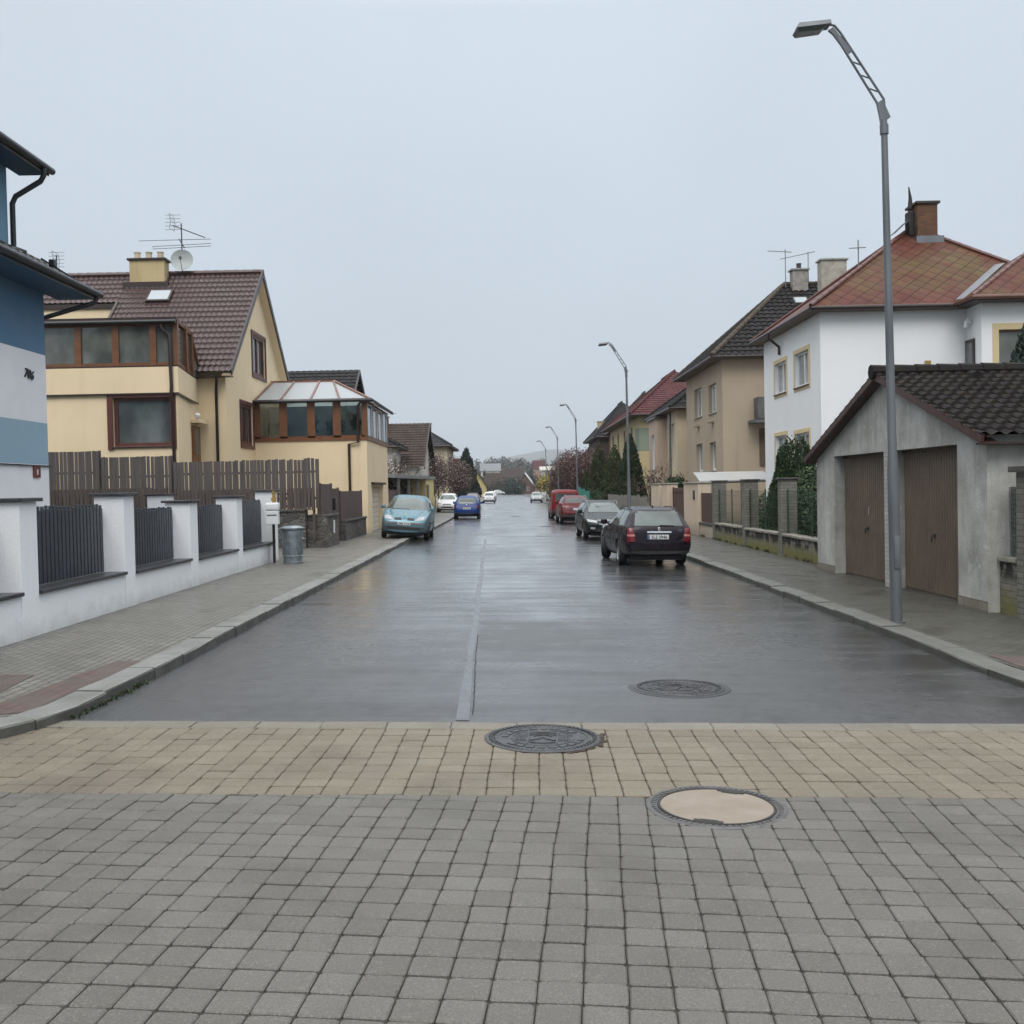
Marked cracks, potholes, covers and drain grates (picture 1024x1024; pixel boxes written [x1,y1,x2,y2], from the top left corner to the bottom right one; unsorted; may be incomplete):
manhole cover [484,724,601,755]
manhole cover [628,679,731,699]
manhole cover [646,786,789,831]
